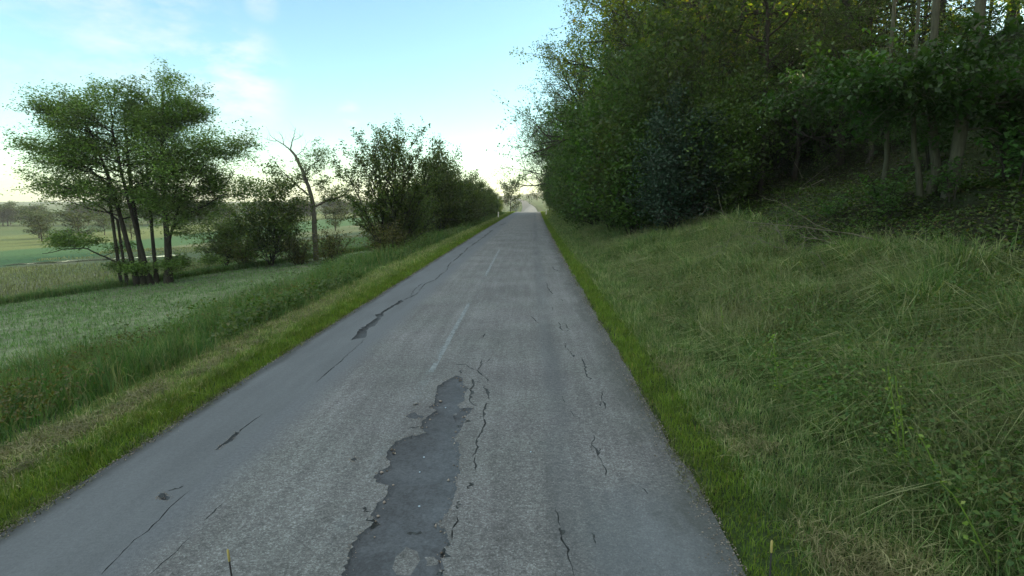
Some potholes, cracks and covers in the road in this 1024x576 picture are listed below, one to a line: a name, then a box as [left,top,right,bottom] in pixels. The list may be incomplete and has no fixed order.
crack [555,508,574,575]
crack [407,358,490,575]
crack [149,502,224,575]
crack [562,396,607,475]
crack [532,266,606,409]
